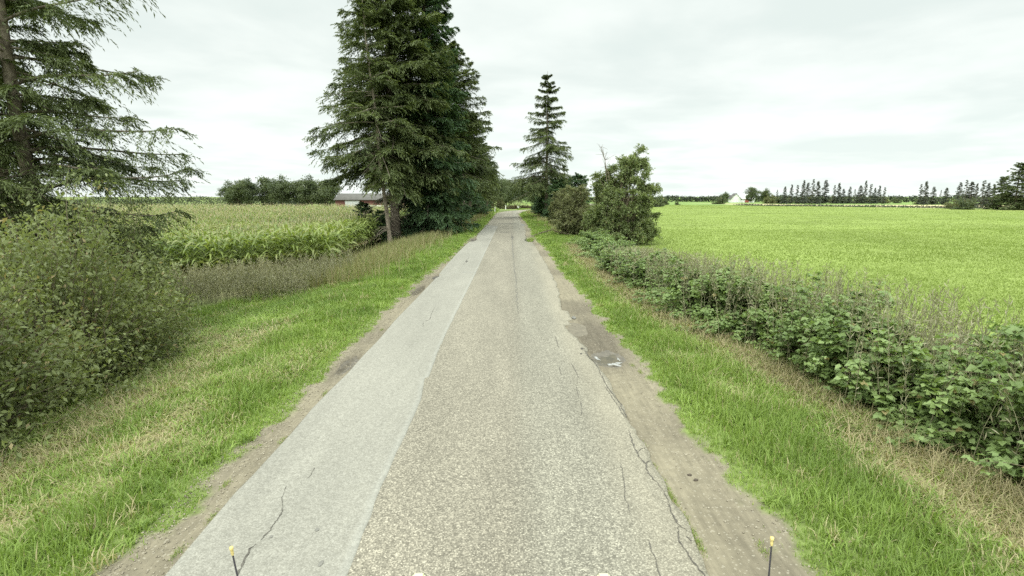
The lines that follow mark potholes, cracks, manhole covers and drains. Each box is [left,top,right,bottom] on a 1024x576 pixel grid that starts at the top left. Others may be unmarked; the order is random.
pothole [590,350,626,368]
crack [237,487,286,574]
crack [559,348,705,576]
